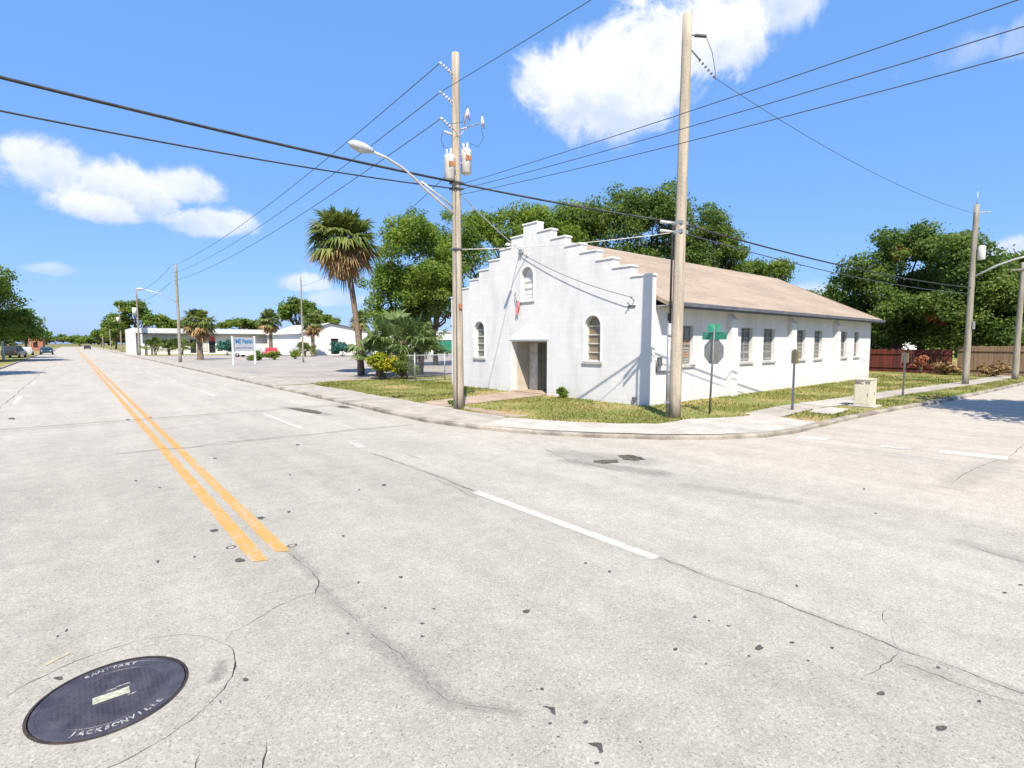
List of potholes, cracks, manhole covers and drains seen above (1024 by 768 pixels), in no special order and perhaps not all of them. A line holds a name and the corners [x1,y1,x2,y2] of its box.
crack [375,452,473,496]
crack [659,557,1024,706]
crack [1,634,237,768]
crack [229,553,510,711]
manhole cover [22,656,189,745]
